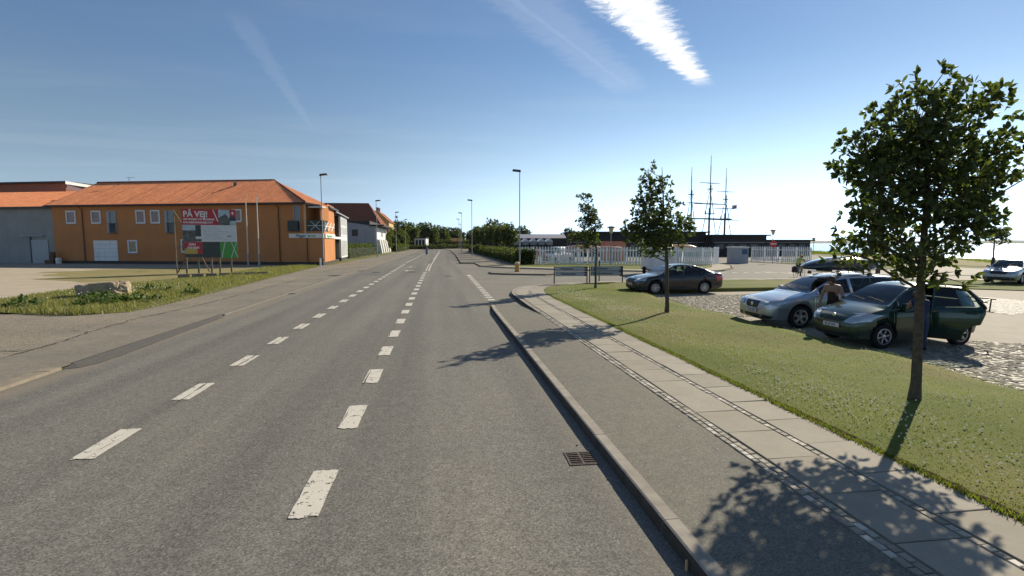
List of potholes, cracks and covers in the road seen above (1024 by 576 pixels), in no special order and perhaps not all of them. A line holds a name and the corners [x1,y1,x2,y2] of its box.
drain grate [563,451,599,466]
